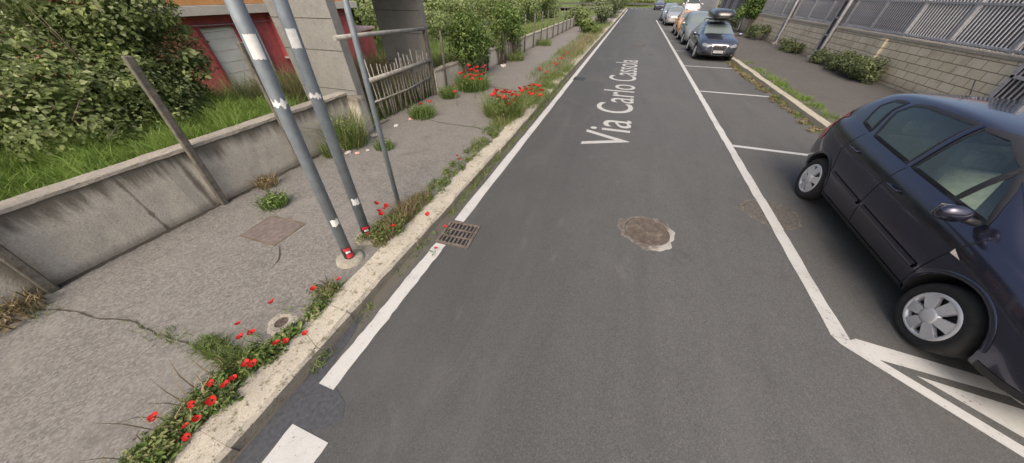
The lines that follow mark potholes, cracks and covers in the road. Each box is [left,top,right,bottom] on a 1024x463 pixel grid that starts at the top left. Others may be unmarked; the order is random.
utility cover [267,311,298,336]
drain grate [435,220,481,249]
manhole cover [617,215,675,252]
utility cover [239,215,306,246]
